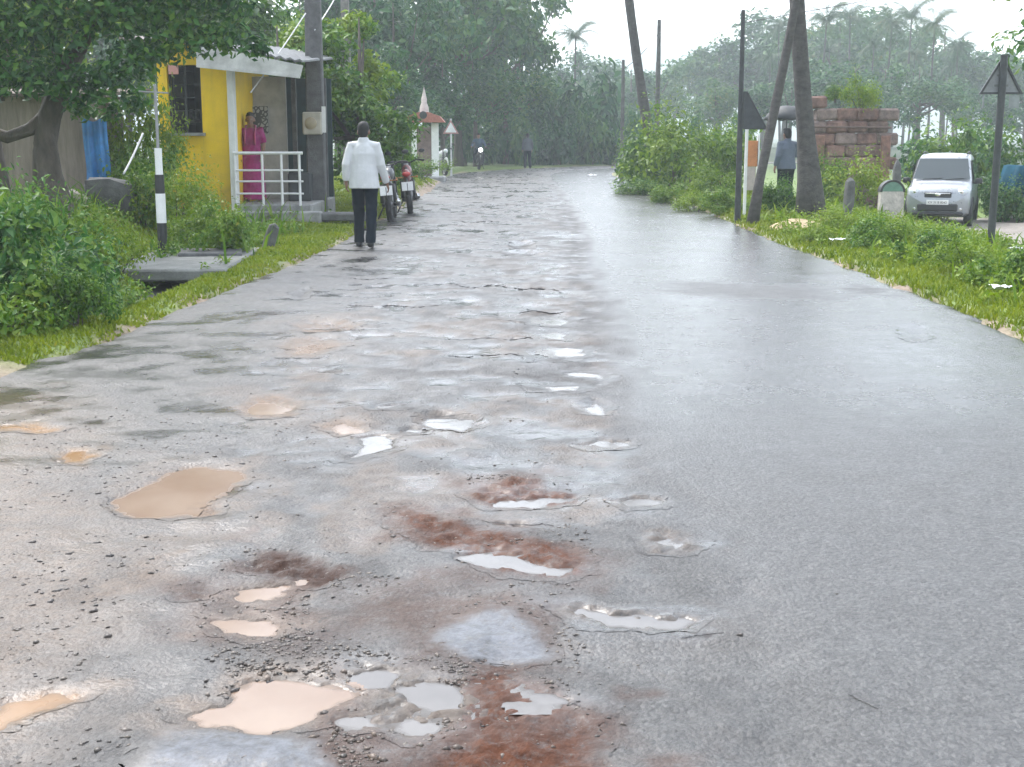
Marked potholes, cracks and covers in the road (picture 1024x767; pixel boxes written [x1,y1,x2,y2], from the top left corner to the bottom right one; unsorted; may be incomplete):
pothole [0,419,78,434]
pothole [407,665,627,767]
pothole [380,505,605,584]
pothole [47,444,109,466]
pothole [626,523,717,558]
pothole [217,575,309,610]
pothole [602,490,674,512]
pothole [101,461,260,522]
pothole [196,609,295,645]
pothole [328,427,408,464]
pothole [160,667,367,735]
crack [455,337,531,357]
